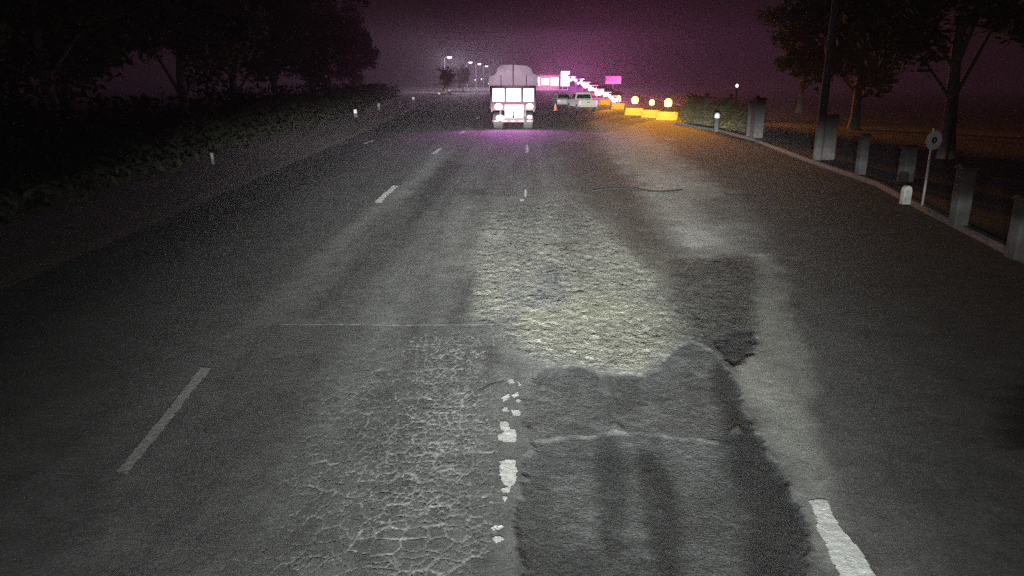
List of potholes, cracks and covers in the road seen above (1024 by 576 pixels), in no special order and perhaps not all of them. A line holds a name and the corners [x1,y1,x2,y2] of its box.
crack [235,332,504,576]
